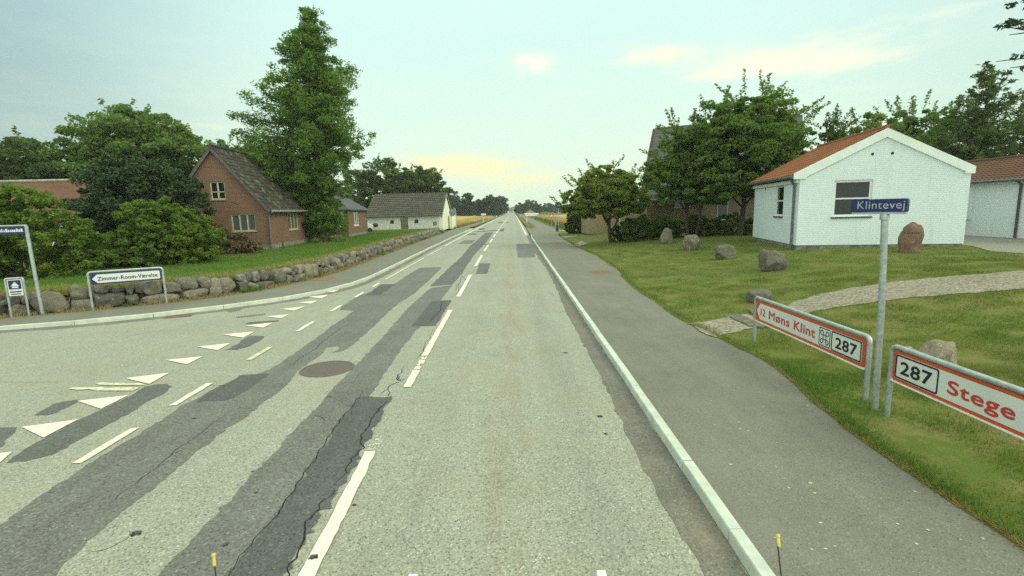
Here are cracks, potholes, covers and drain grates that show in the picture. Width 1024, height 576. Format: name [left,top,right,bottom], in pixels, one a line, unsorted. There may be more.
manhole cover [299,361,355,377]
